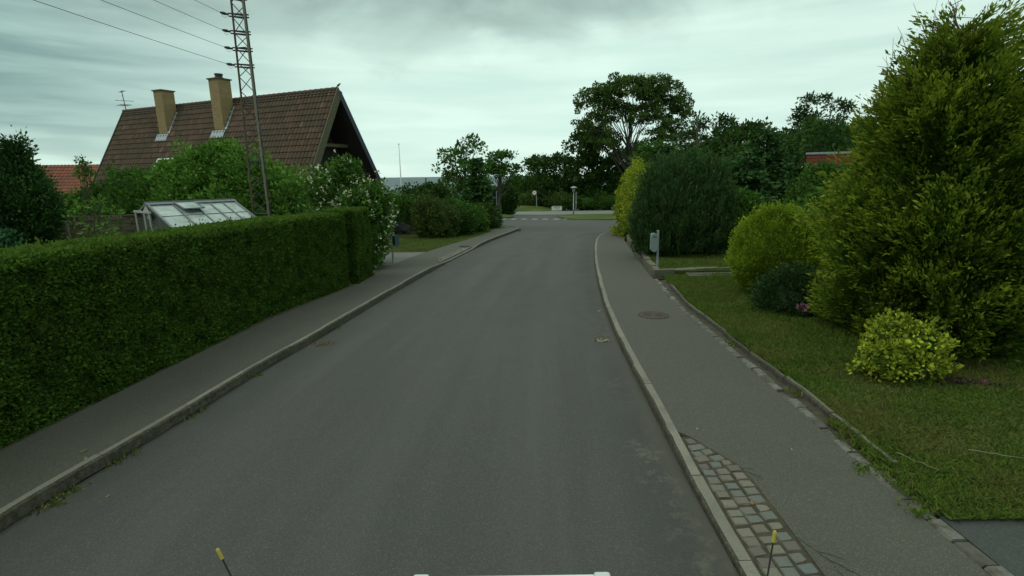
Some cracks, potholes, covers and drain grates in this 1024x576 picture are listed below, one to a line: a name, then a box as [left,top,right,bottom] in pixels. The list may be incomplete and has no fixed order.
manhole cover [638,311,669,319]
crack [799,538,861,576]
